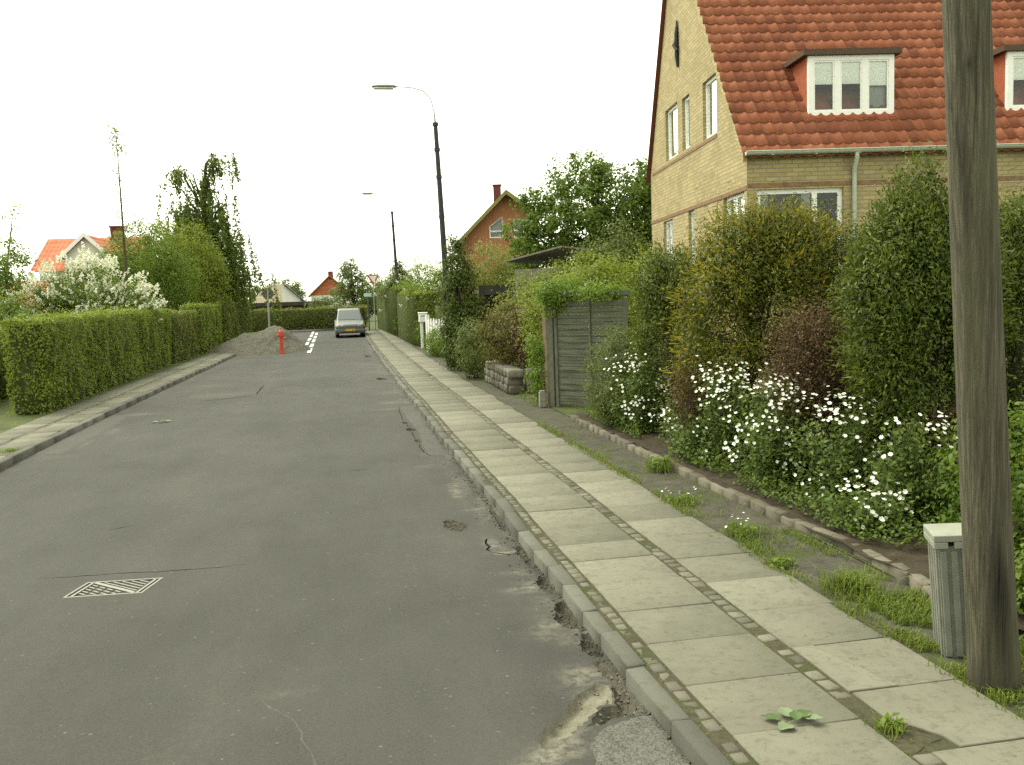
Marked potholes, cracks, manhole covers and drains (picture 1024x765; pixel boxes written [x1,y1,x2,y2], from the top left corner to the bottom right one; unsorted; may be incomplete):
crack [44,565,236,579]
crack [252,687,316,765]
pothole [535,576,557,595]
pothole [585,661,646,727]
pothole [580,633,606,658]
pothole [553,602,582,629]
pothole [443,519,469,532]
pothole [538,683,612,749]
